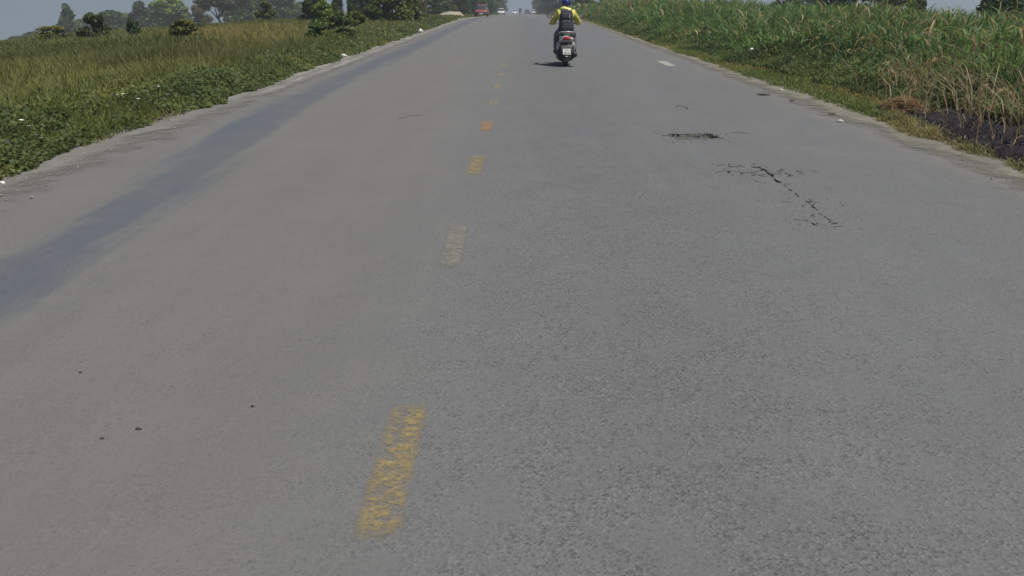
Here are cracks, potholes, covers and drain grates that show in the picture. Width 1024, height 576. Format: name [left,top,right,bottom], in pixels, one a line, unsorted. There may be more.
pothole [663,133,722,141]
